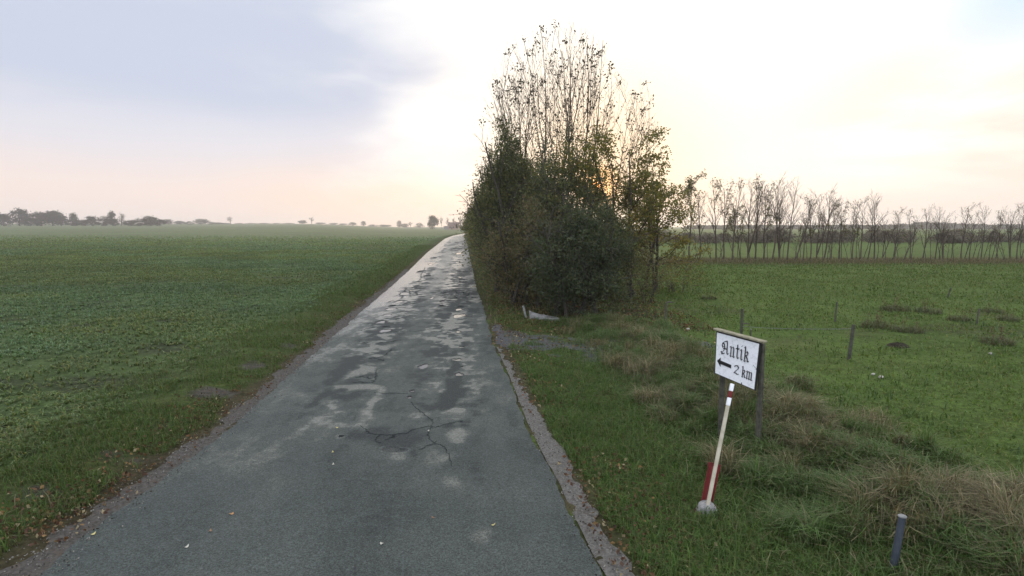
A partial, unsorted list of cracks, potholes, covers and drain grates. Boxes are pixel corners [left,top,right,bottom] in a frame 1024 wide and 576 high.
crack [353,327,462,466]
